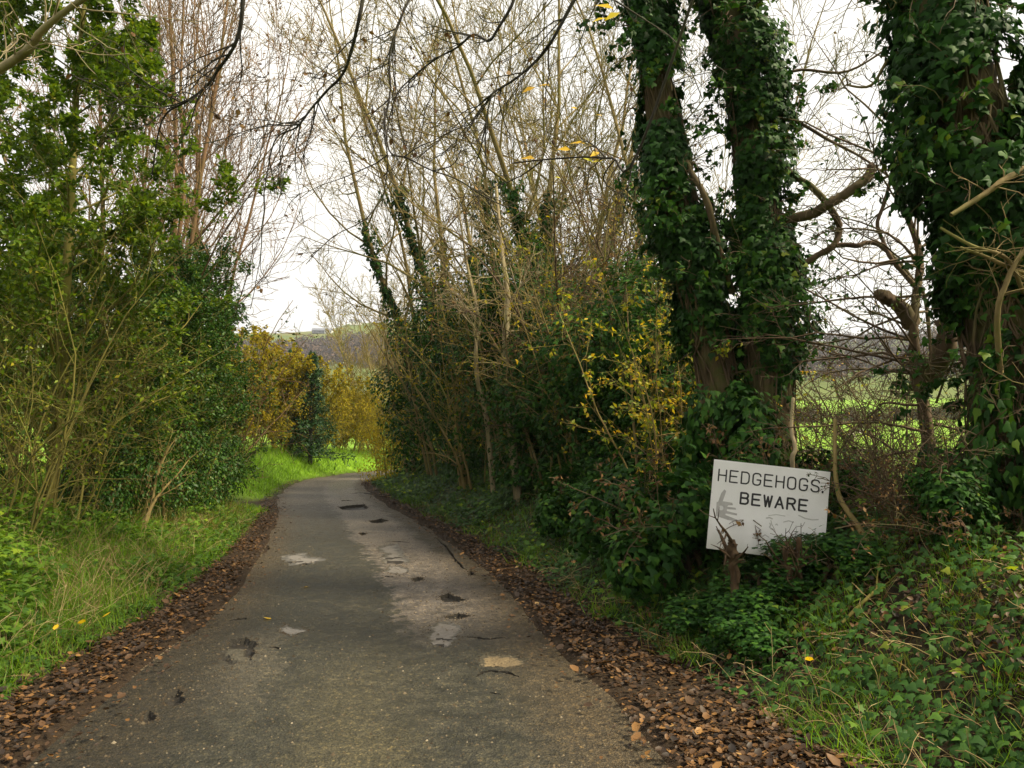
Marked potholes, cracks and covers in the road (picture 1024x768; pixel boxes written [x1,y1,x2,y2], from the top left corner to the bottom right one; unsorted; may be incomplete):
crack [436,538,467,570]
pothole [142,710,157,723]
pothole [164,689,185,706]
pothole [215,637,259,665]
crack [476,670,519,695]
pothole [440,593,465,602]
